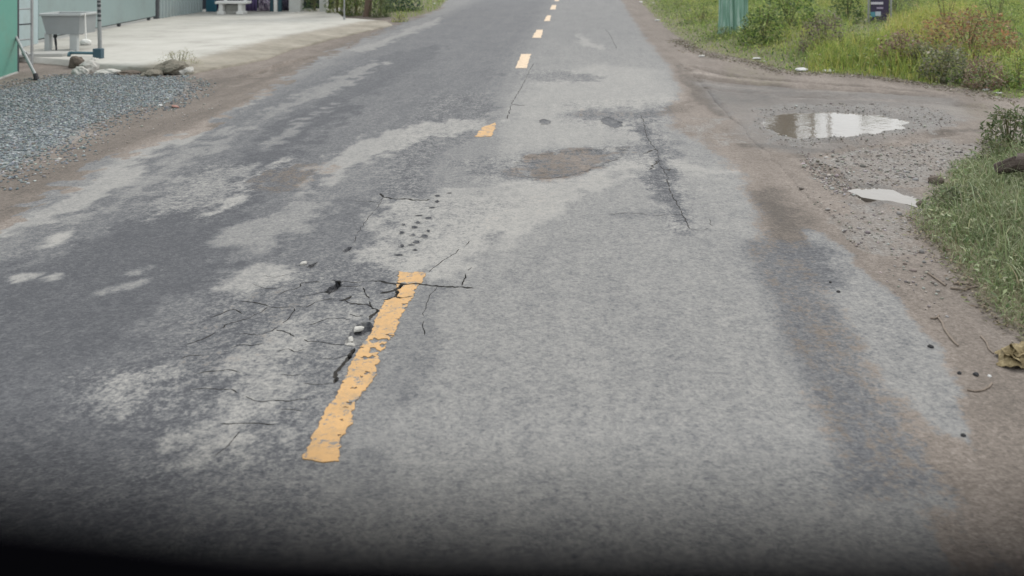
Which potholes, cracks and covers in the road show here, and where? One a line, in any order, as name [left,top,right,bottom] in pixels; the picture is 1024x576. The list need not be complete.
pothole [600,117,623,129]
crack [354,193,430,242]
crack [181,242,472,456]
crack [618,116,711,230]
